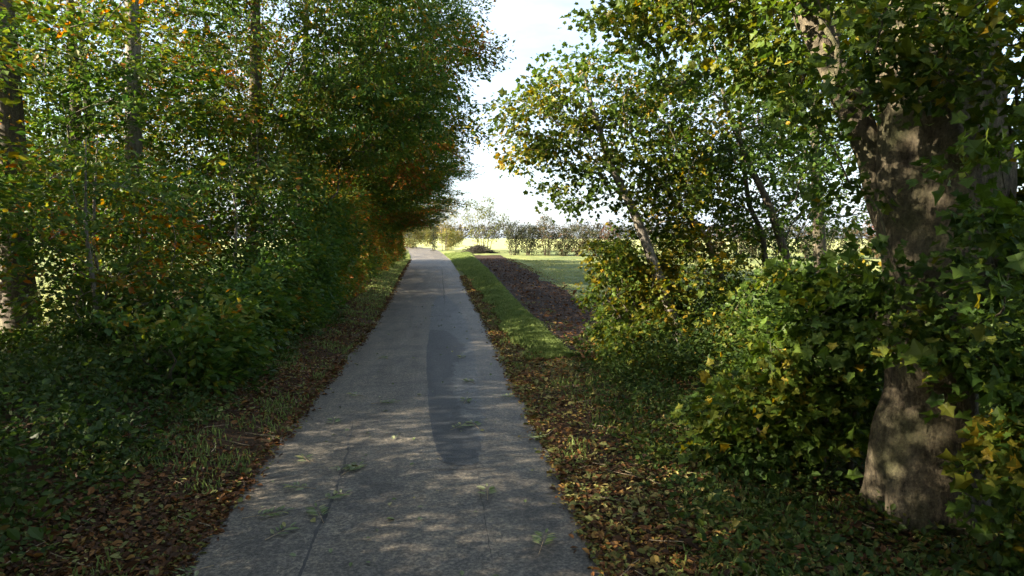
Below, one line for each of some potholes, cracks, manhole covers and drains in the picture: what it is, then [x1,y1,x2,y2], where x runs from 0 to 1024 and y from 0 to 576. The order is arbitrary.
crack [476,467,493,561]
crack [298,422,353,576]
